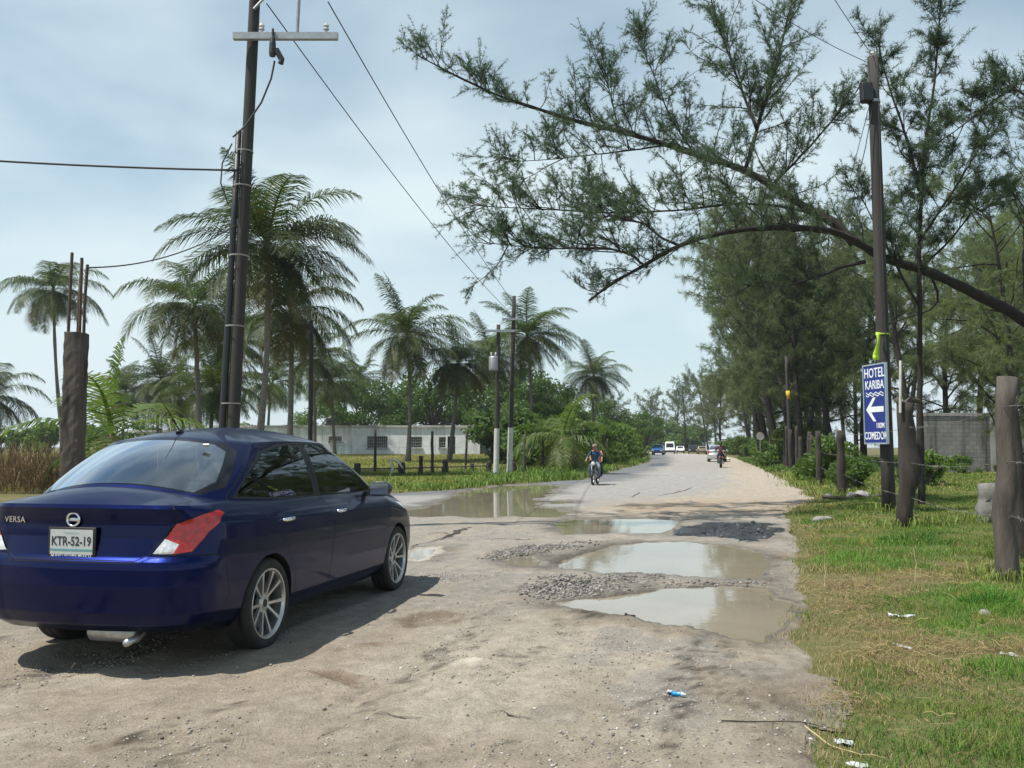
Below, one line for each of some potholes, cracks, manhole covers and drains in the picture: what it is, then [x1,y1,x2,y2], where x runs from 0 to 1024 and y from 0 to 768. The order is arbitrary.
pothole [550,585,806,644]
pothole [405,483,582,518]
crack [413,527,472,546]
pothole [407,546,446,562]
pothole [542,541,781,579]
pothole [548,516,688,535]
